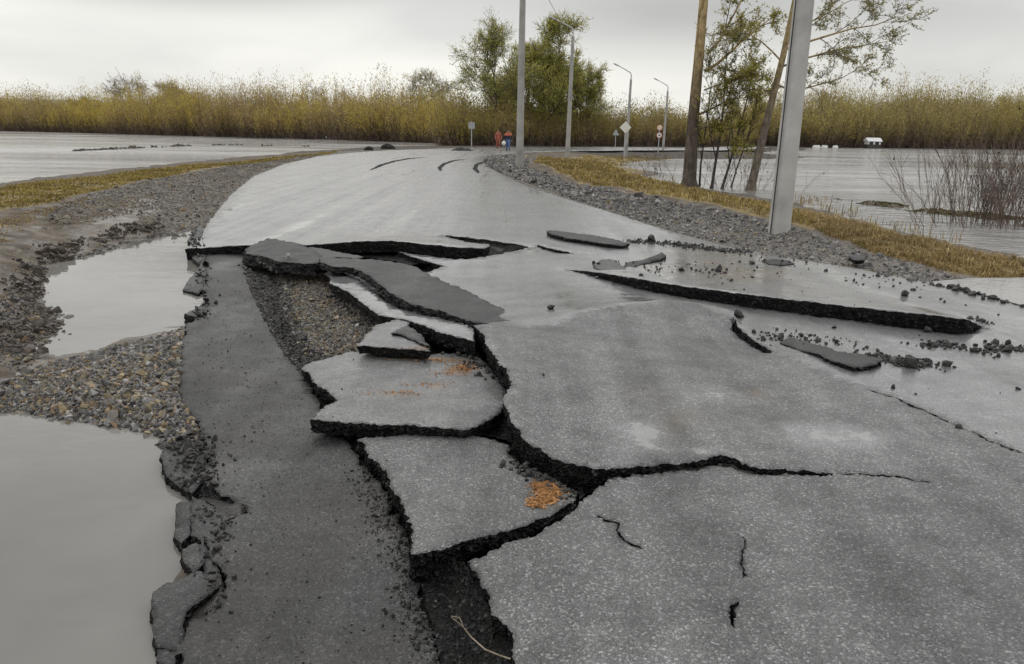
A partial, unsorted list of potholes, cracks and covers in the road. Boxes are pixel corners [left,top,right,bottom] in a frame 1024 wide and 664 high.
crack [574,271,980,353]
crack [842,474,928,482]
crack [420,414,726,664]
crack [347,235,557,266]
crack [884,395,1021,453]
